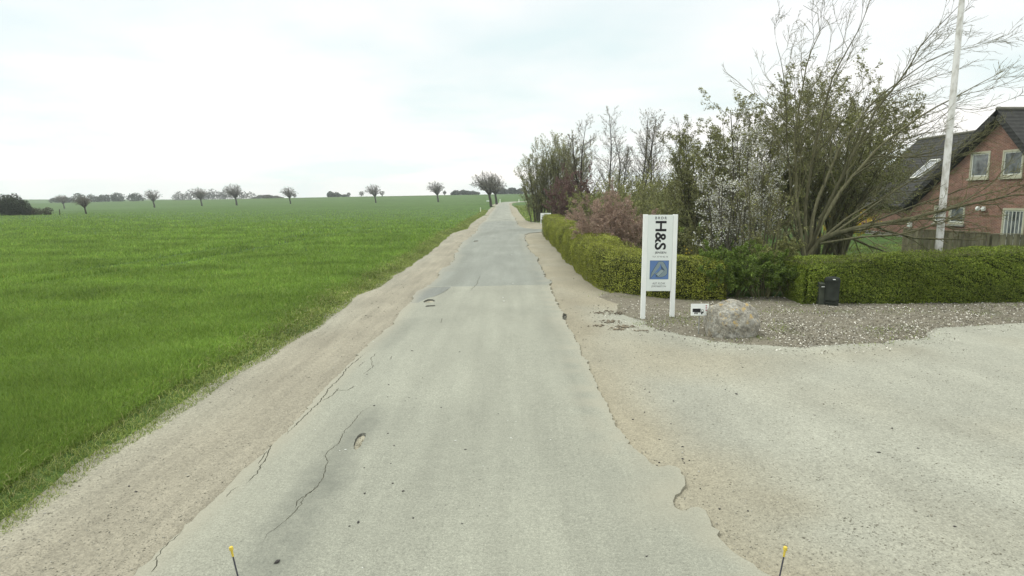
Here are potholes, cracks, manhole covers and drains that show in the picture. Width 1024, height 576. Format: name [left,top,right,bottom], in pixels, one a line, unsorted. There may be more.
crack [226,352,392,497]
crack [257,408,367,546]
pothole [354,433,366,450]
